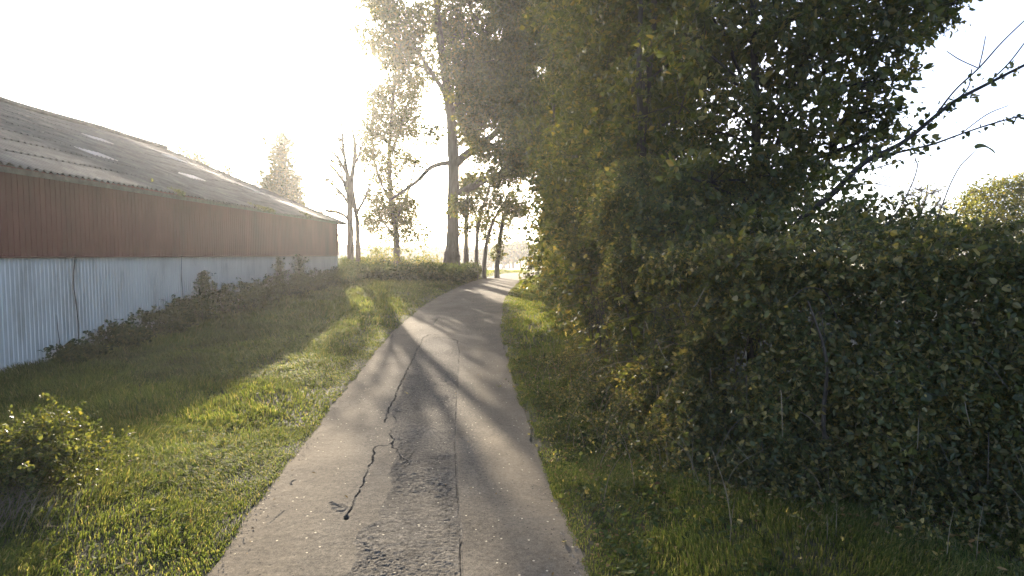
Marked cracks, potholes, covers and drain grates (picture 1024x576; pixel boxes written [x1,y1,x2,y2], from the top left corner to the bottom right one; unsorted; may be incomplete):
crack [343,317,465,576]
